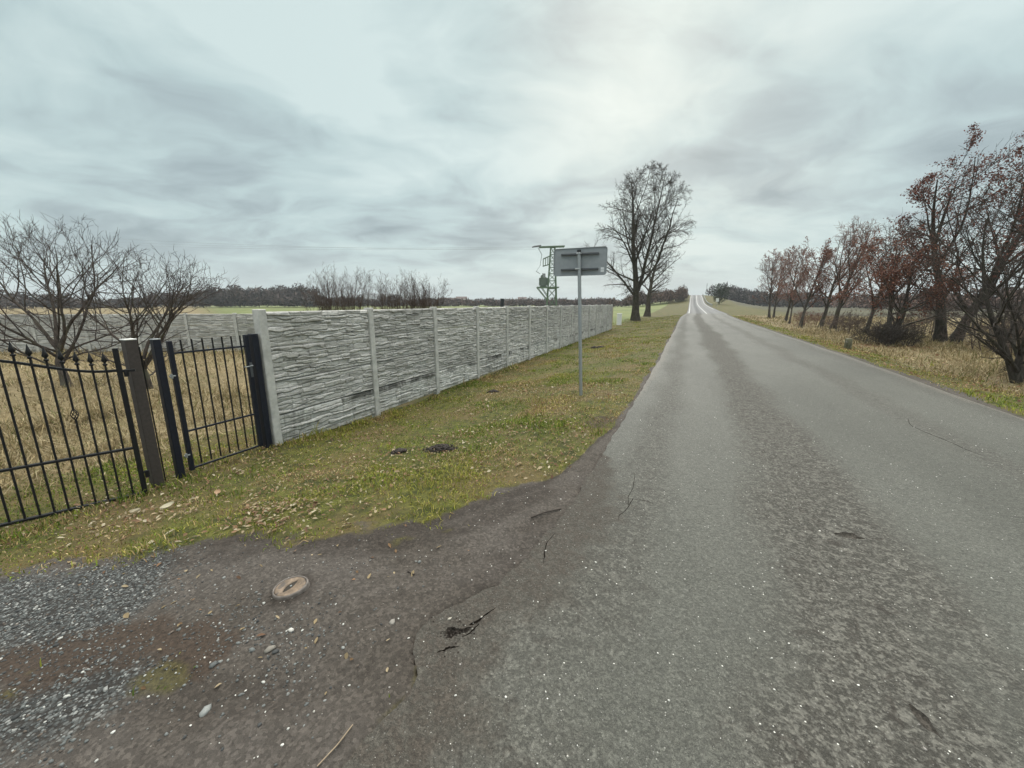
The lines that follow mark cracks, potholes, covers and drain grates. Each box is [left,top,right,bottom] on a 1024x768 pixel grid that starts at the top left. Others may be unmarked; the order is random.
pothole [429,613,505,657]
crack [437,608,495,653]
manhole cover [272,576,310,600]
